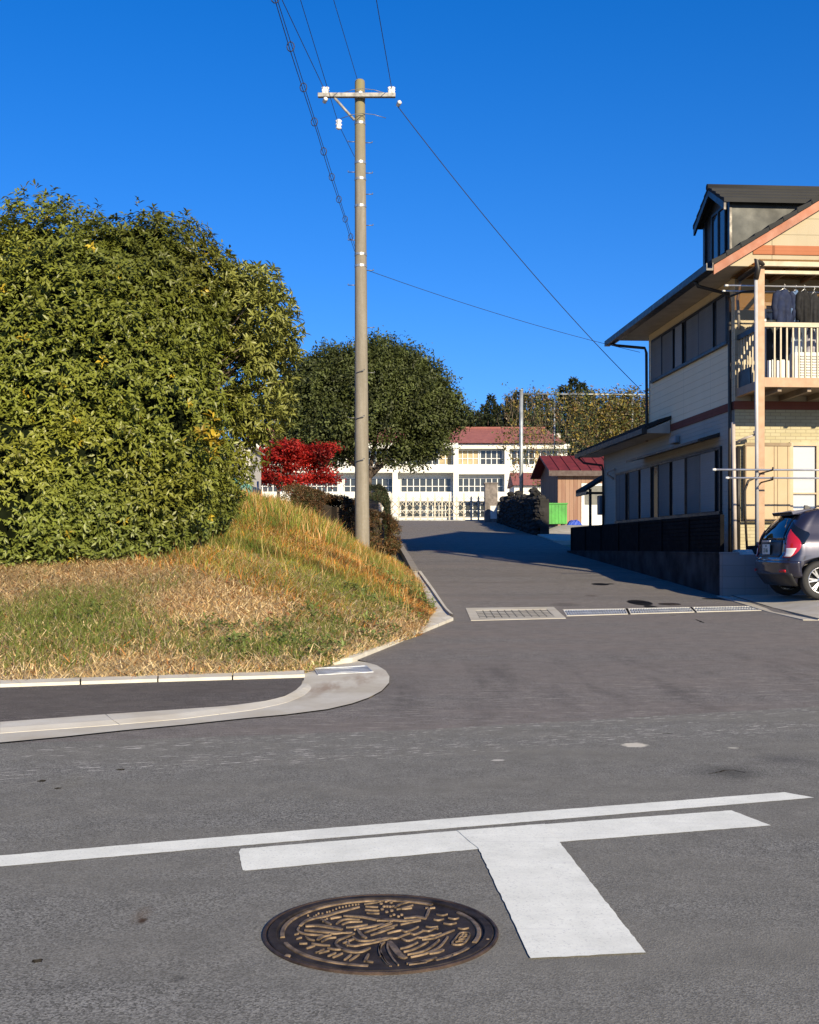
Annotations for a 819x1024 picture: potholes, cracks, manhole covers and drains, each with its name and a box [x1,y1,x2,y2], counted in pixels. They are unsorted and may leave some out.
drain grate [563,608,628,616]
drain grate [314,665,373,675]
manhole cover [262,894,499,975]
